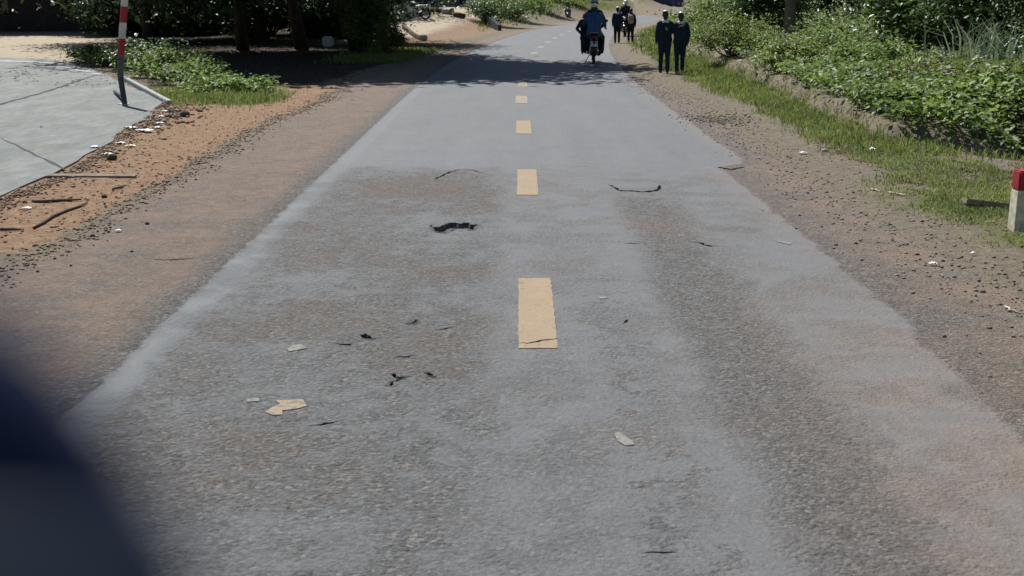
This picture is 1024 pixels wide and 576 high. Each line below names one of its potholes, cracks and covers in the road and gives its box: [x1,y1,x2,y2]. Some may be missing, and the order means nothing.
pothole [428,222,481,234]
